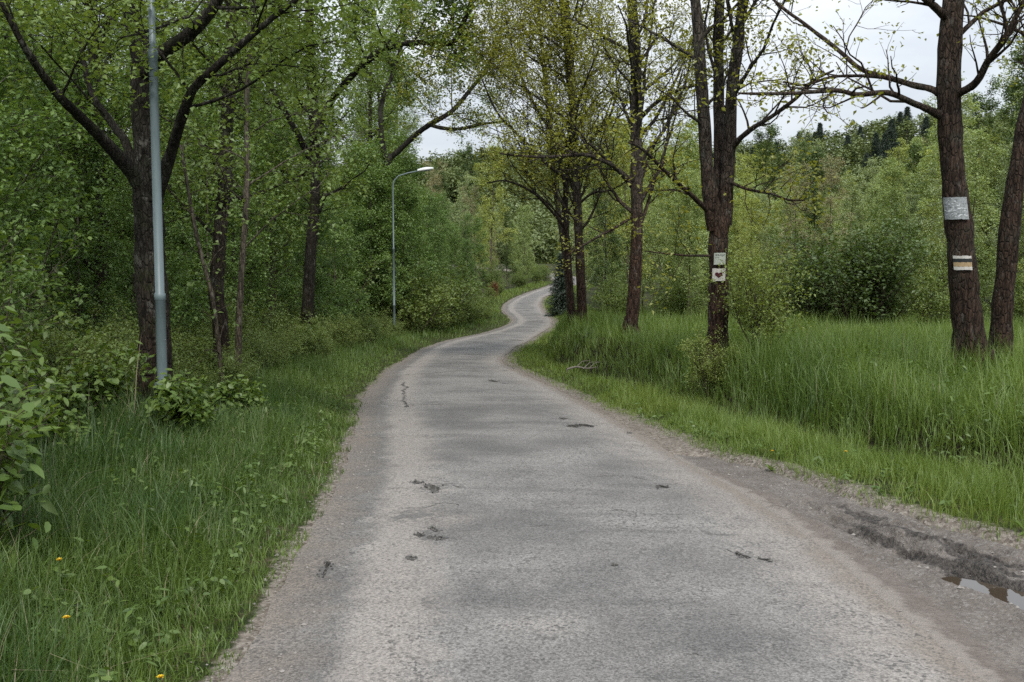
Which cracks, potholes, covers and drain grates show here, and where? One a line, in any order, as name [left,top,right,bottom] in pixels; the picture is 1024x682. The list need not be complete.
crack [396,372,441,407]
pothole [421,483,444,494]
